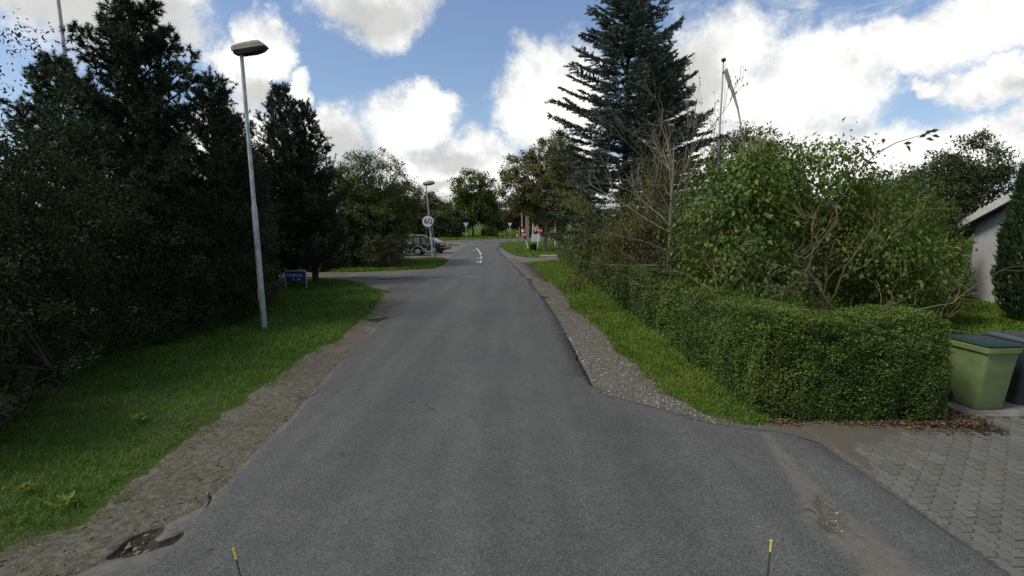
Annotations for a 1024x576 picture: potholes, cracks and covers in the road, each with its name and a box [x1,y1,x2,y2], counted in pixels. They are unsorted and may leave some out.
pothole [816,495,848,534]
pothole [105,525,184,560]
